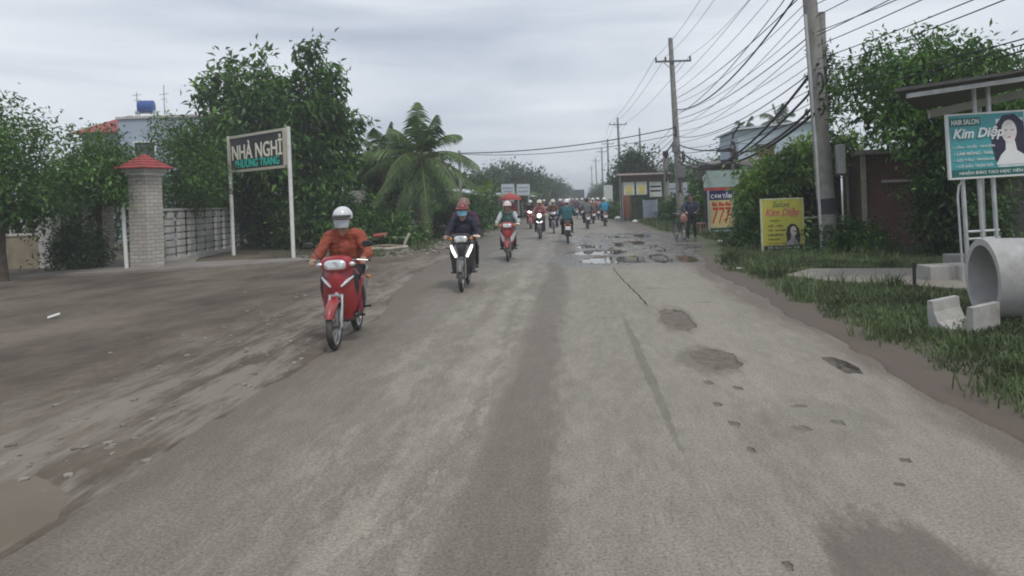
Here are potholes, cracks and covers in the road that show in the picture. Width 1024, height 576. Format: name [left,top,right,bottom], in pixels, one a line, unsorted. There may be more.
pothole [579,256,647,264]
pothole [689,348,743,370]
pothole [648,253,673,263]
pothole [786,425,813,433]
pothole [658,309,697,332]
pothole [821,357,863,374]
